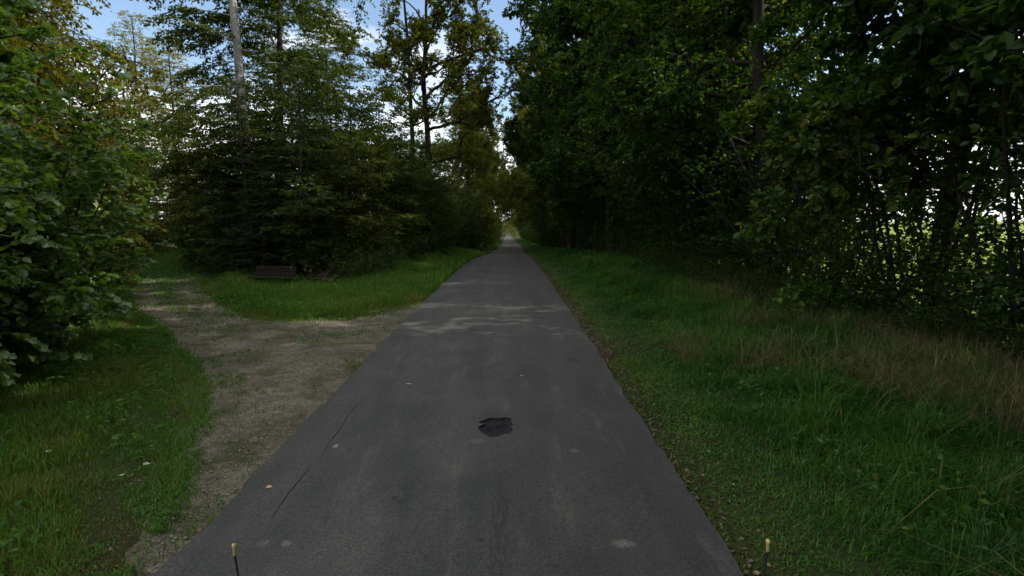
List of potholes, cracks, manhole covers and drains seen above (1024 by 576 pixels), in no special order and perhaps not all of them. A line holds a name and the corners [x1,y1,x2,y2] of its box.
crack [271,375,383,519]
pothole [478,417,513,437]
